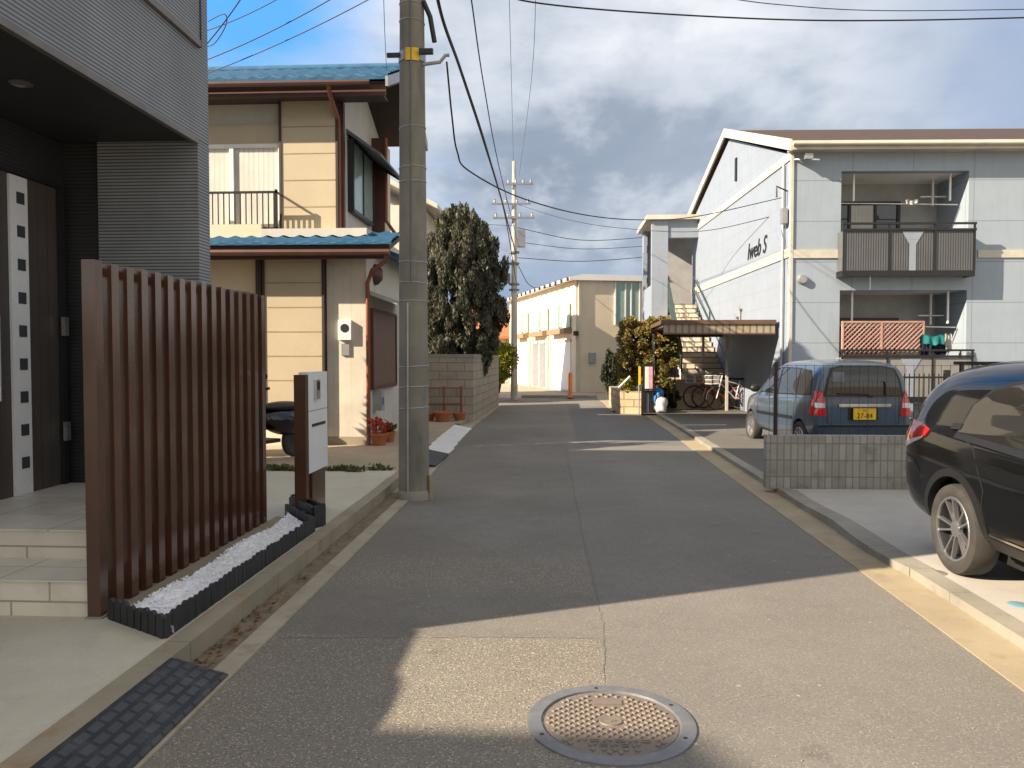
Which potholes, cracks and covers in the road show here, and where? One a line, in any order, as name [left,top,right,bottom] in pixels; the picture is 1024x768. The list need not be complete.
manhole cover [527,685,697,767]
crack [566,452,606,675]
